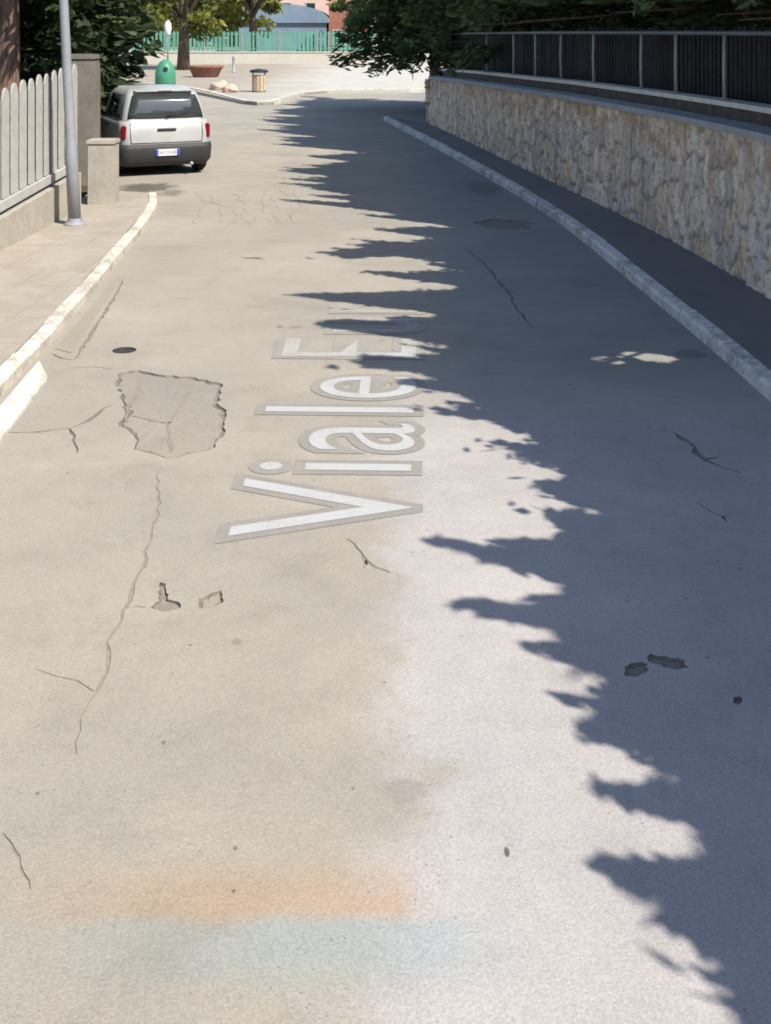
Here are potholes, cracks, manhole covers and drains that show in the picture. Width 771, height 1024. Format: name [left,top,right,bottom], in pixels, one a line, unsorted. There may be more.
crack [3,833,31,889]
pothole [624,662,649,677]
crack [346,538,391,573]
pothole [198,590,224,608]
pothole [151,582,181,612]
crack [662,429,741,473]
crack [191,190,303,225]
crack [8,405,111,454]
crack [36,473,162,754]
crack [464,249,534,328]
pothole [114,370,227,459]
pothole [647,654,689,670]
